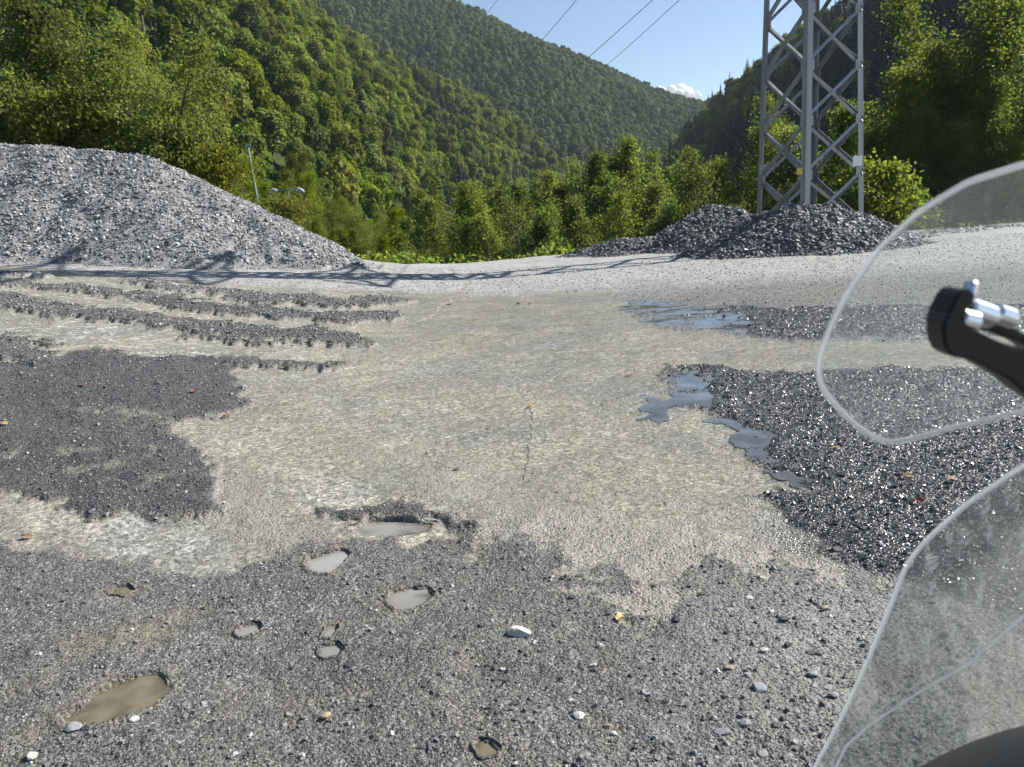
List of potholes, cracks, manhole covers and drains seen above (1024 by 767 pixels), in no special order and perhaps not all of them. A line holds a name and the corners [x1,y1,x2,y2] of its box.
pothole [48,666,181,733]
pothole [469,736,505,760]
pothole [233,619,265,639]
pothole [343,513,438,538]
crack [520,397,540,484]
pothole [315,639,348,661]
pothole [106,582,138,597]
pothole [300,546,354,575]
pothole [319,622,341,640]
